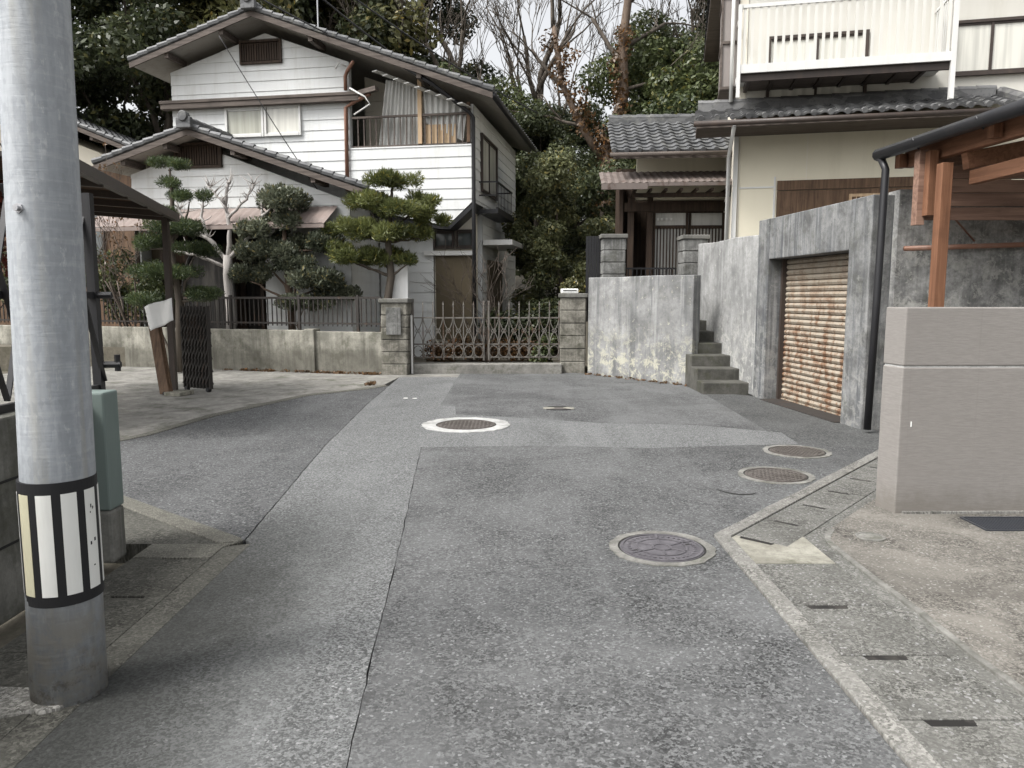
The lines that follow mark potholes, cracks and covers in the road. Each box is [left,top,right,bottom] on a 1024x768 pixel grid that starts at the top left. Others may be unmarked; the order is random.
manhole cover [763,445,832,459]
manhole cover [609,530,716,567]
manhole cover [738,466,816,485]
drain grate [959,516,1024,531]
manhole cover [421,417,510,433]
